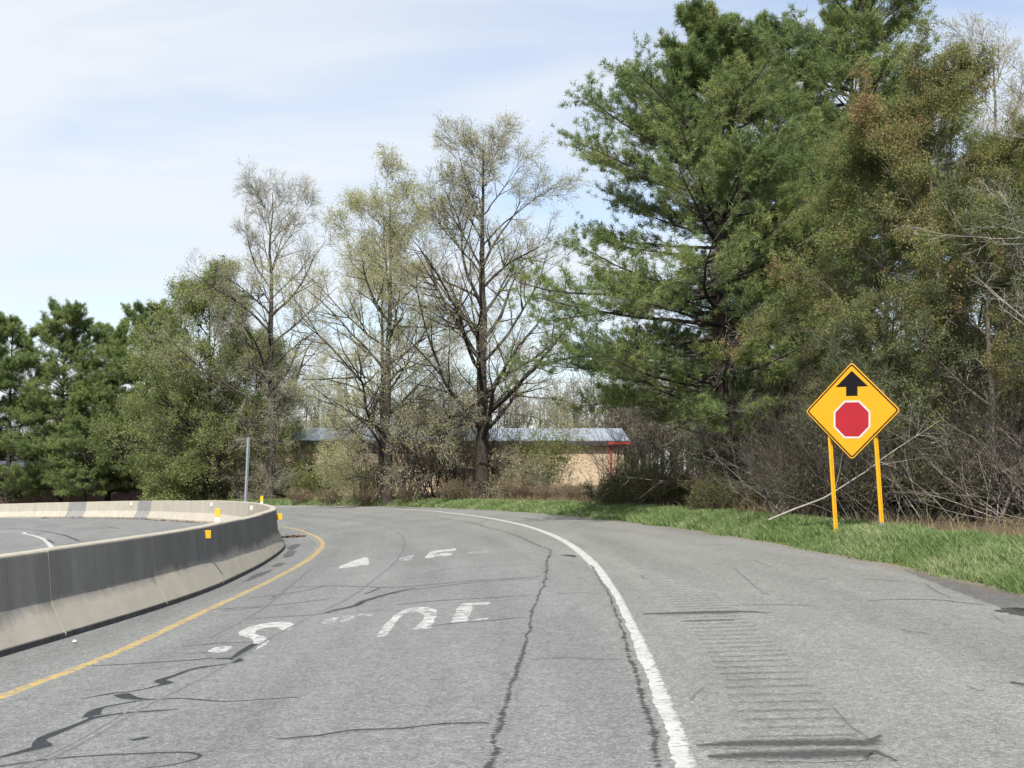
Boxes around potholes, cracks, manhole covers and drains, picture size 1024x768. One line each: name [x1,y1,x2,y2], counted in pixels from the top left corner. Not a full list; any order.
crack [830,706,869,738]
crack [221,513,705,768]
